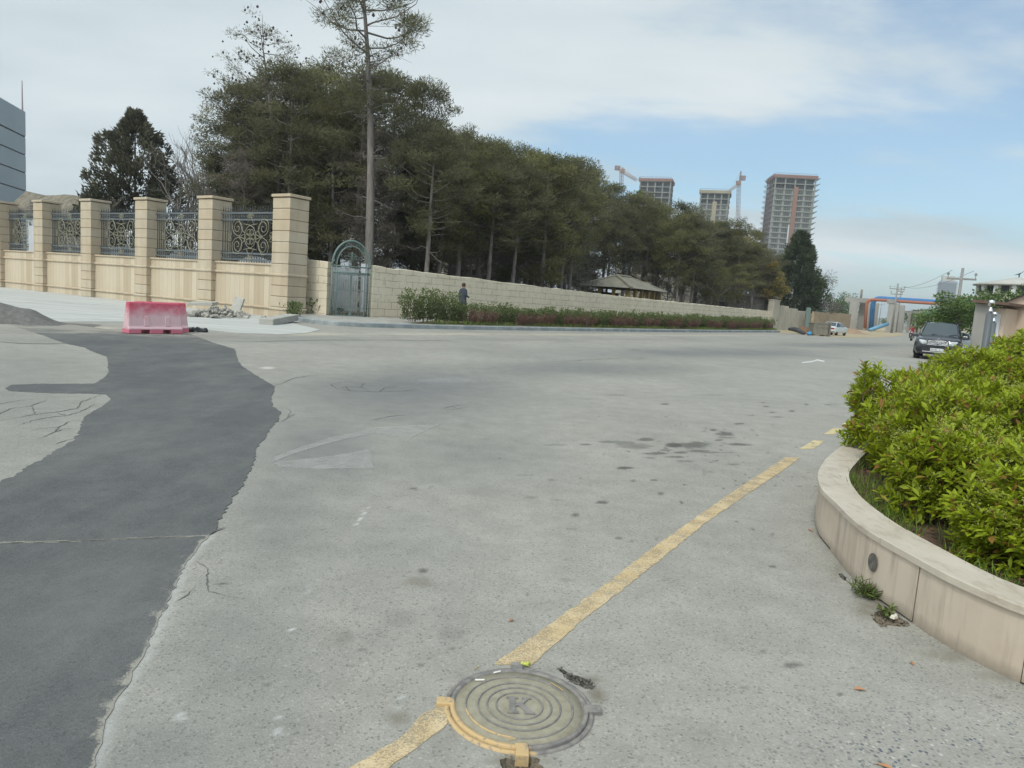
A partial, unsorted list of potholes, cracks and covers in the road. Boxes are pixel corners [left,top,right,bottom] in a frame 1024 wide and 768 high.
manhole cover [436,662,602,767]
crack [0,397,95,443]
